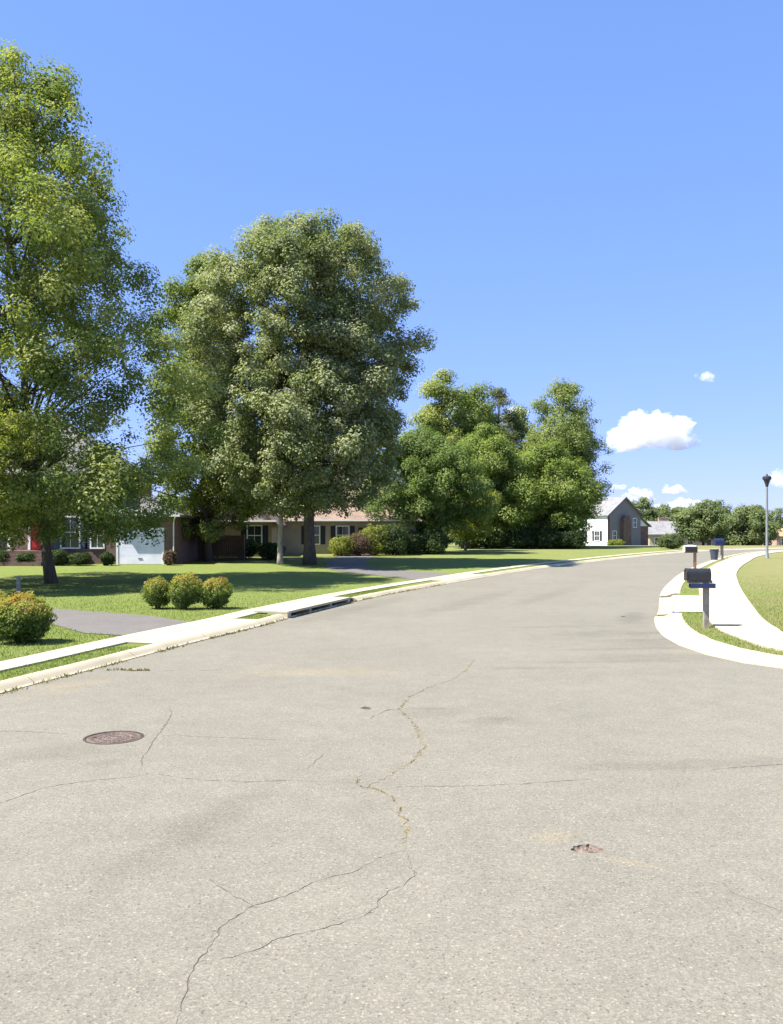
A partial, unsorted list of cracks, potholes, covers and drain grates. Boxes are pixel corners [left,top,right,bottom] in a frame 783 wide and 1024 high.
manhole cover [83,731,144,745]
crack [176,851,399,1023]
crack [2,709,295,803]
pothole [571,844,605,853]
crack [198,660,588,966]
drain grate [254,596,351,618]
crack [161,754,329,783]
